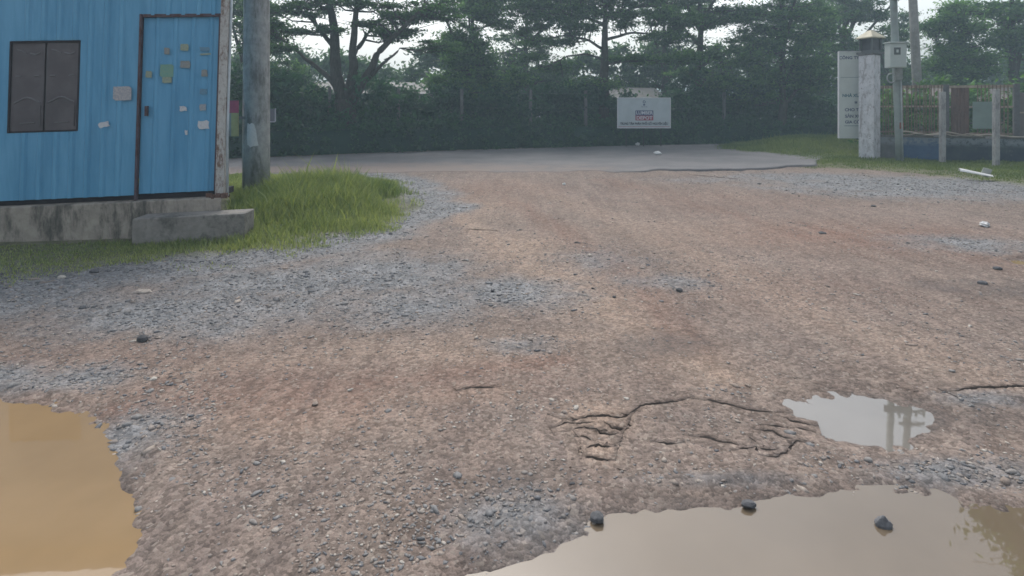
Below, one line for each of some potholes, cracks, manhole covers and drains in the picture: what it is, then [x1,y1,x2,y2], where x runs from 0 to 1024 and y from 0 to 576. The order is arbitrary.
pothole [0,379,193,576]
pothole [752,377,989,466]
crack [544,392,822,471]
pothole [396,465,1024,576]
crack [454,383,502,396]
